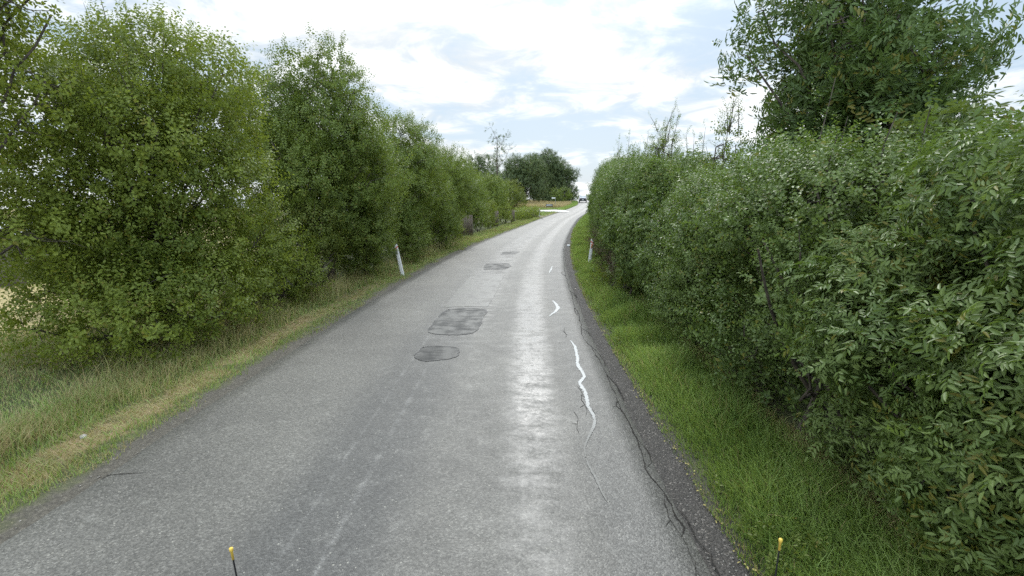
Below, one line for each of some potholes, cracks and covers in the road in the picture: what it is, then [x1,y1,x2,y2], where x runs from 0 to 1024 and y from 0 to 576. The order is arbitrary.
crack [563,251,720,576]
